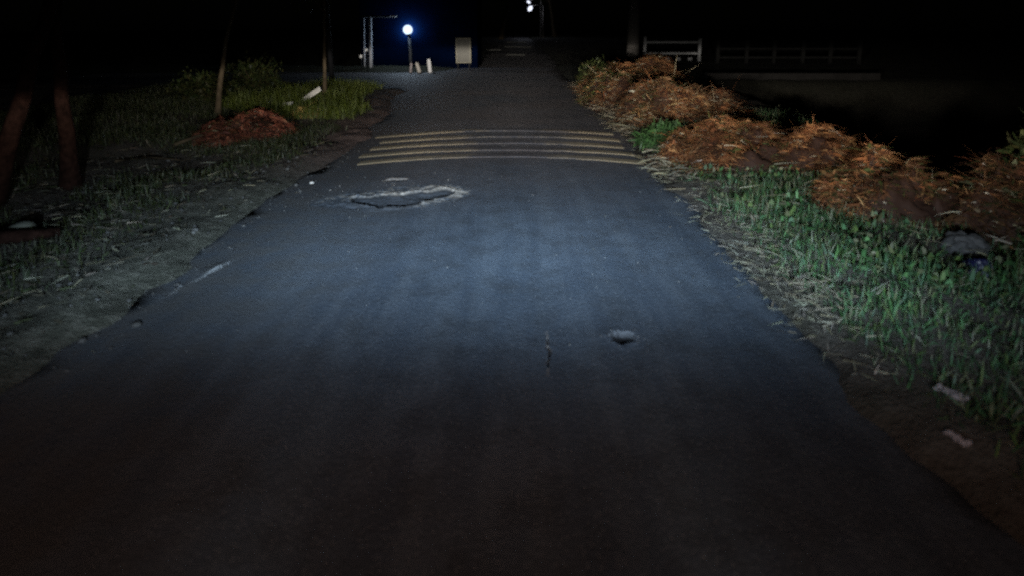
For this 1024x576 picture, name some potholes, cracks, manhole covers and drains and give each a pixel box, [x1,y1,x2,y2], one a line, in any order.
pothole [607,330,637,345]
pothole [310,184,471,212]
